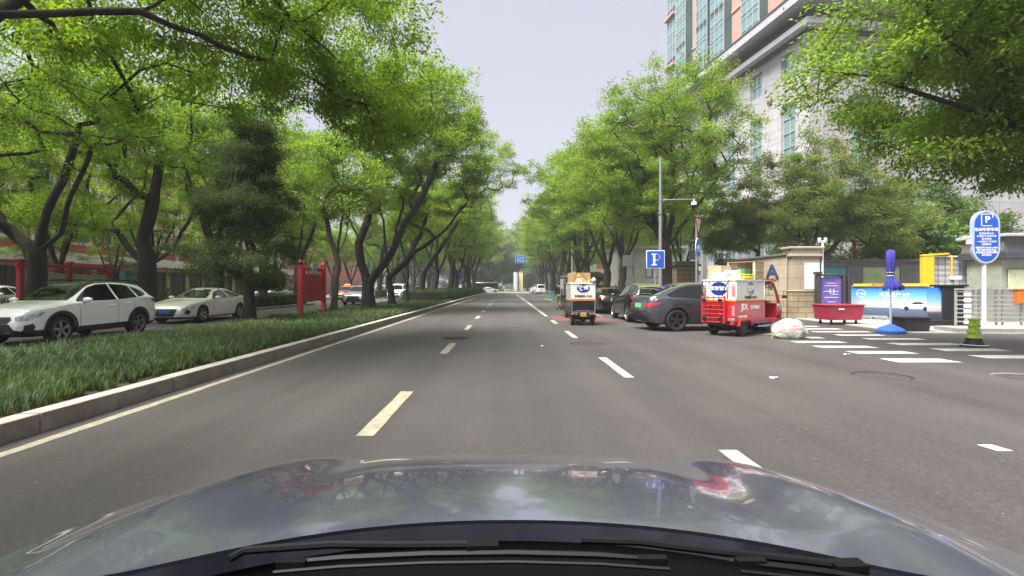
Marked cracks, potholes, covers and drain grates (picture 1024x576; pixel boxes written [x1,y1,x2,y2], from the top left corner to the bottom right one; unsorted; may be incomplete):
manhole cover [851,372,915,381]
manhole cover [989,372,1024,380]
